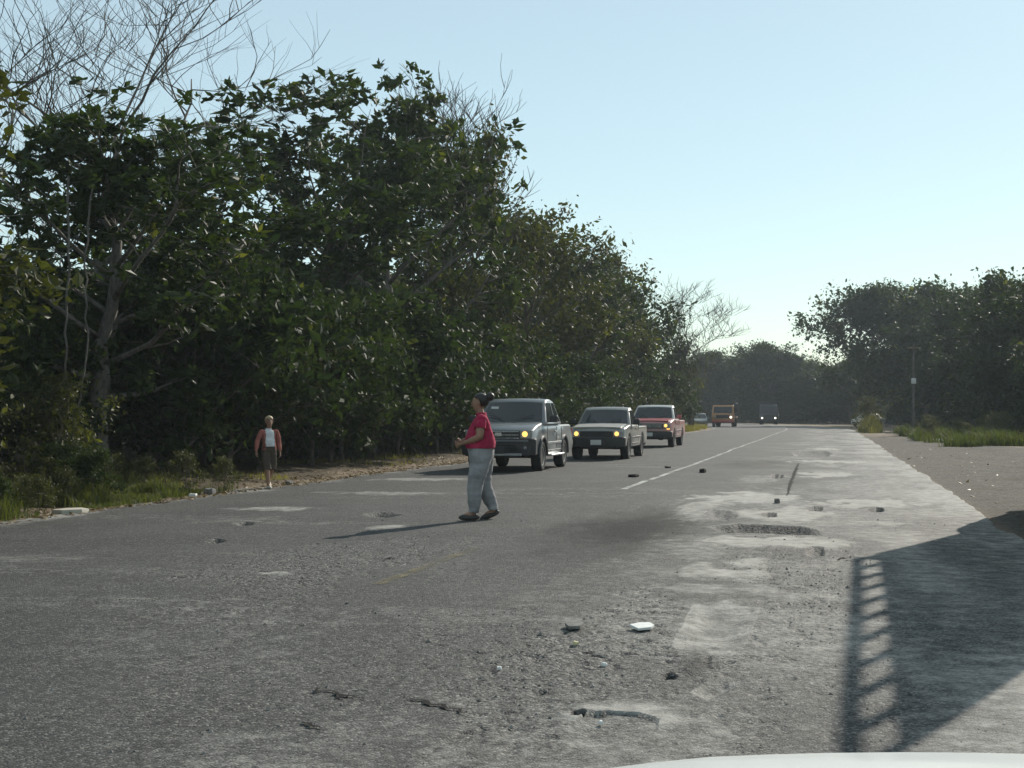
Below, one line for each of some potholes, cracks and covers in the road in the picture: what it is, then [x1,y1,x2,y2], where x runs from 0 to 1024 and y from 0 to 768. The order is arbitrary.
pothole [711,523,822,536]
crack [313,688,364,699]
crack [409,698,464,713]
